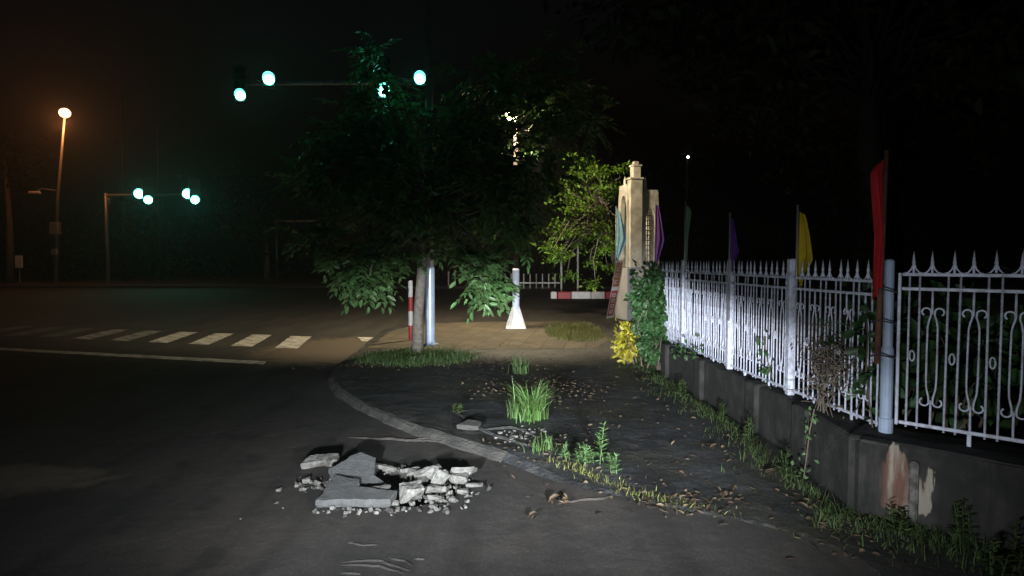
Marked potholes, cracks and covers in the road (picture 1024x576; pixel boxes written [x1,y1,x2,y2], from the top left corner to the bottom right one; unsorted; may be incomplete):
crack [341,542,424,575]
pothole [321,468,474,507]
